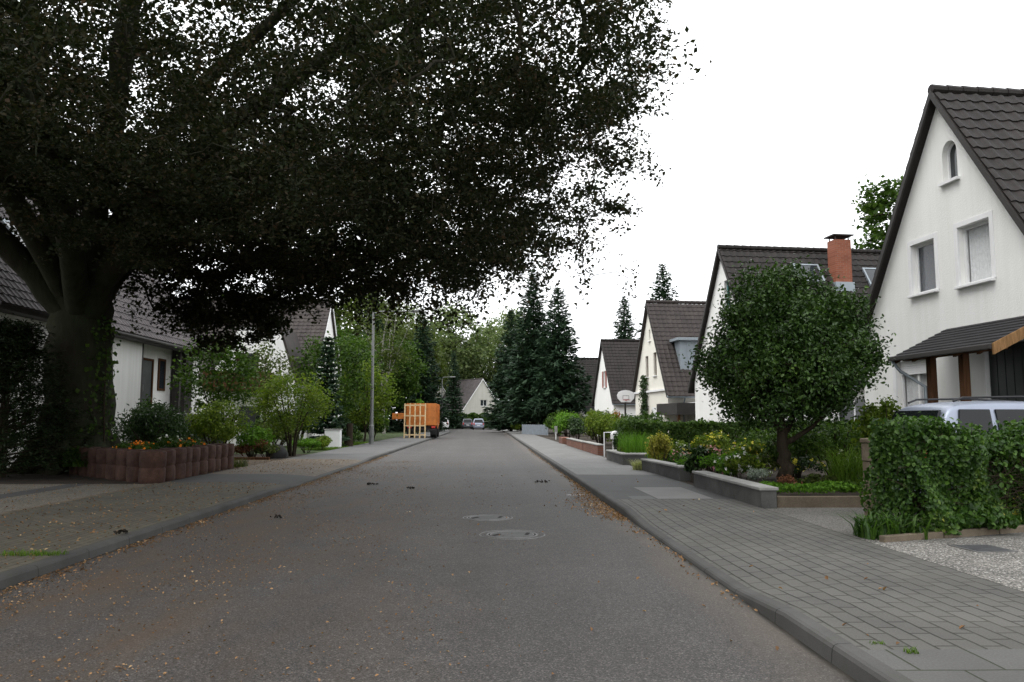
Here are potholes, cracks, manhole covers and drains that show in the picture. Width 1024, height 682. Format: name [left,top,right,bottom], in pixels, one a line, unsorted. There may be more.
manhole cover [479,530,545,540]
